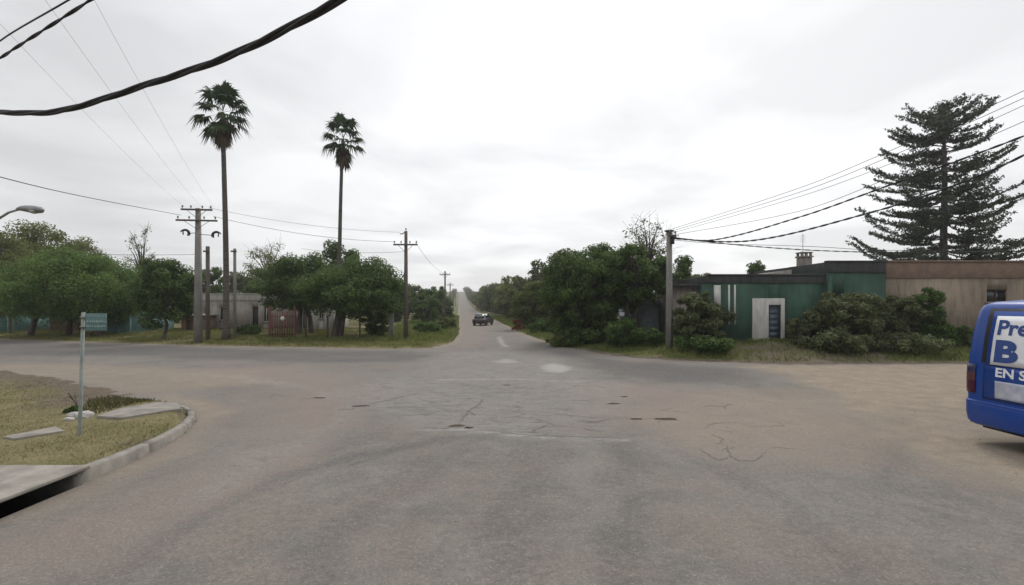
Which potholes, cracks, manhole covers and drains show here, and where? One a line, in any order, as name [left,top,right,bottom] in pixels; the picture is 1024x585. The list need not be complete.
crack [646,404,803,461]
crack [339,378,622,433]
